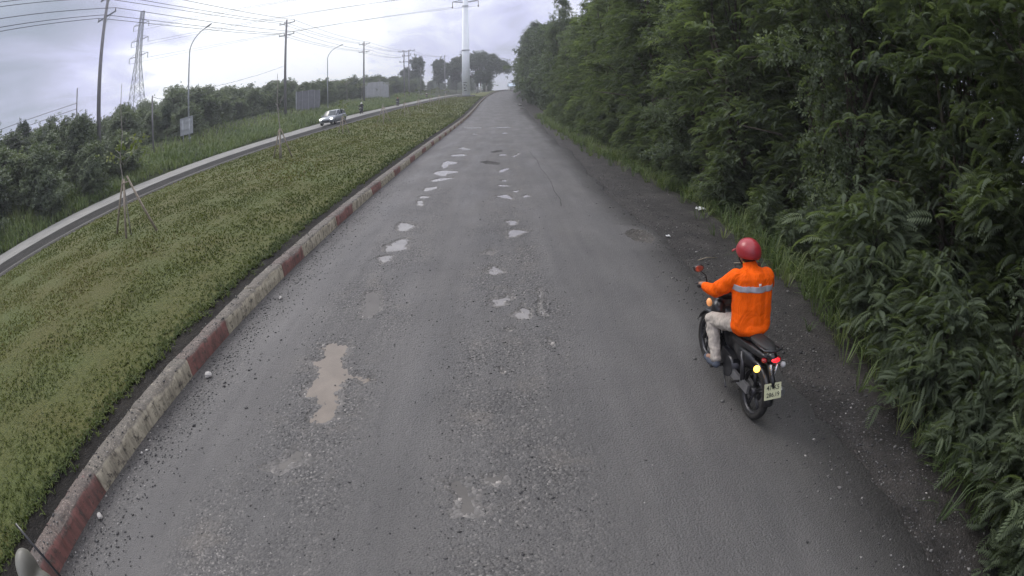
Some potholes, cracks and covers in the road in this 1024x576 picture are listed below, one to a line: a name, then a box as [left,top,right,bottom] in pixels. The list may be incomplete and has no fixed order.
pothole [488,292,517,308]
pothole [299,339,378,427]
pothole [508,301,534,321]
pothole [505,228,533,239]
pothole [380,237,412,252]
pothole [432,474,487,519]
pothole [482,263,508,275]
pothole [624,229,655,243]
pothole [394,221,418,232]
pothole [357,289,385,319]
pothole [256,441,324,476]
